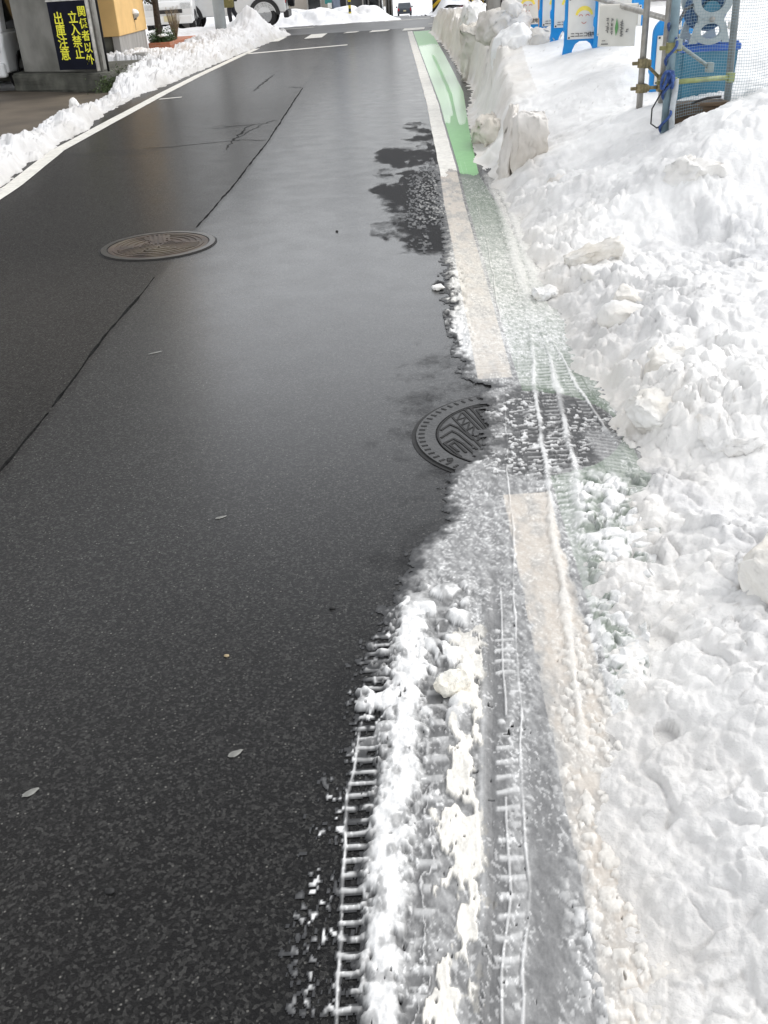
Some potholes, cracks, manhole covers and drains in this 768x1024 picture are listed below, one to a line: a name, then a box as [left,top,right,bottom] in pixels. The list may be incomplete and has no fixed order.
manhole cover [412,396,492,473]
manhole cover [99,231,217,261]
crack [158,120,276,149]
